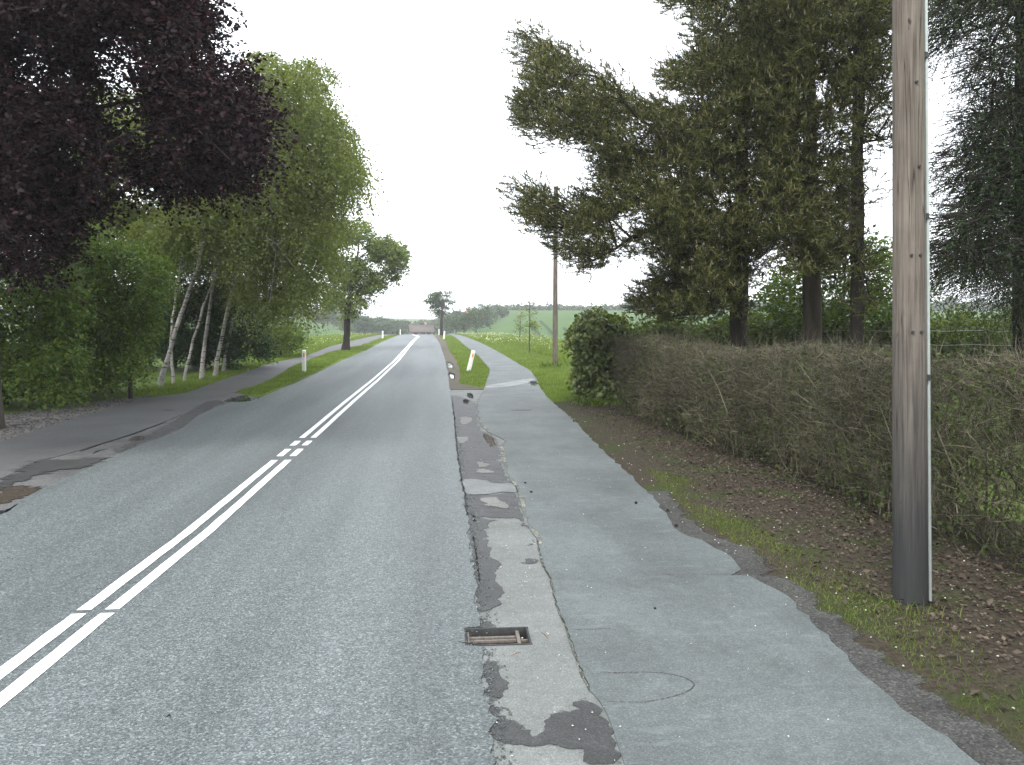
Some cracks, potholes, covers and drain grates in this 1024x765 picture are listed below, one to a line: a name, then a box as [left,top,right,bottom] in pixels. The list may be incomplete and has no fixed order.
crack [607,672,695,703]
drain grate [464,627,533,646]
crack [536,541,610,691]
